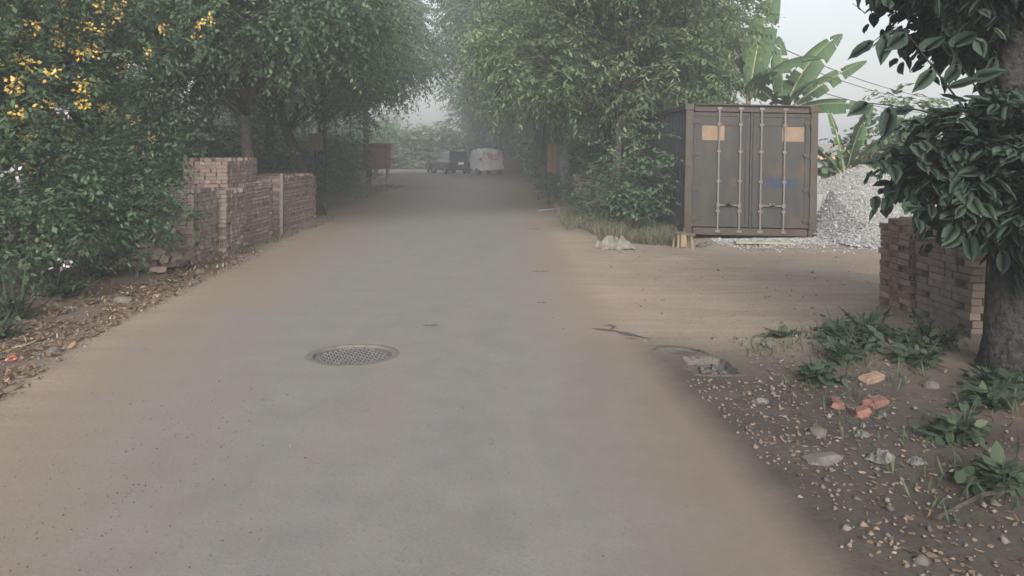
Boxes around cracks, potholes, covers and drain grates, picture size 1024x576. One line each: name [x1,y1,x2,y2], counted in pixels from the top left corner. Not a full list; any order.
pothole [680,356,746,377]
crack [591,324,710,356]
